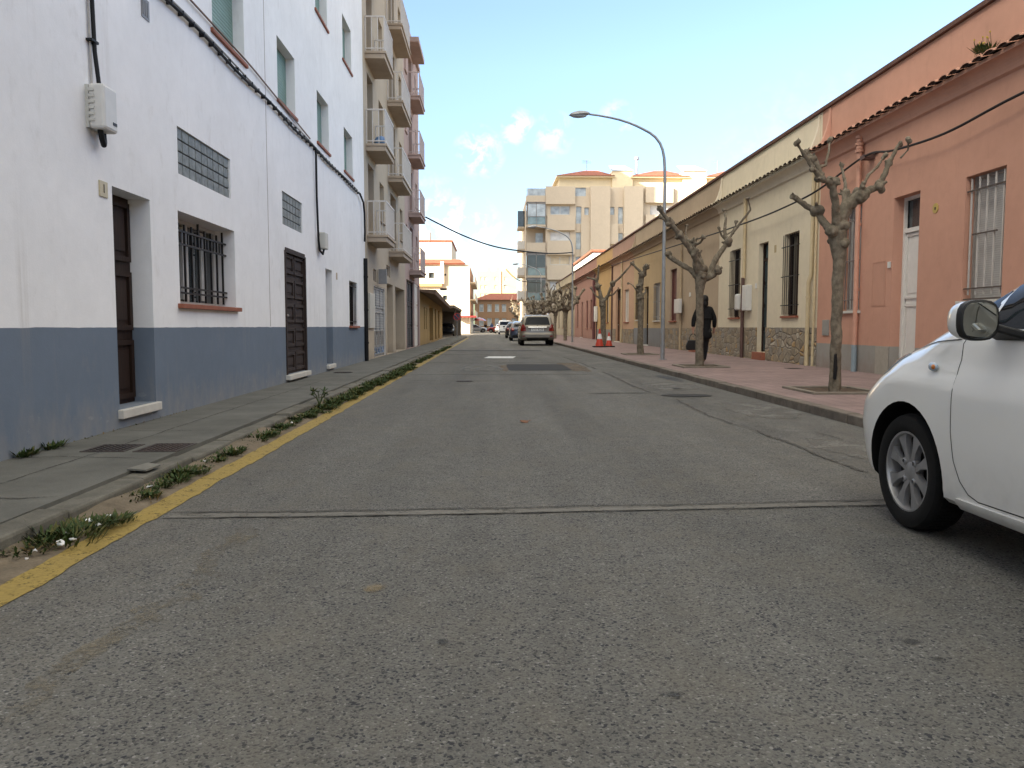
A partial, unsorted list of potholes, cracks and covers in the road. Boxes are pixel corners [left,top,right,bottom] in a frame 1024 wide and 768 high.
crack [757,430,869,473]
